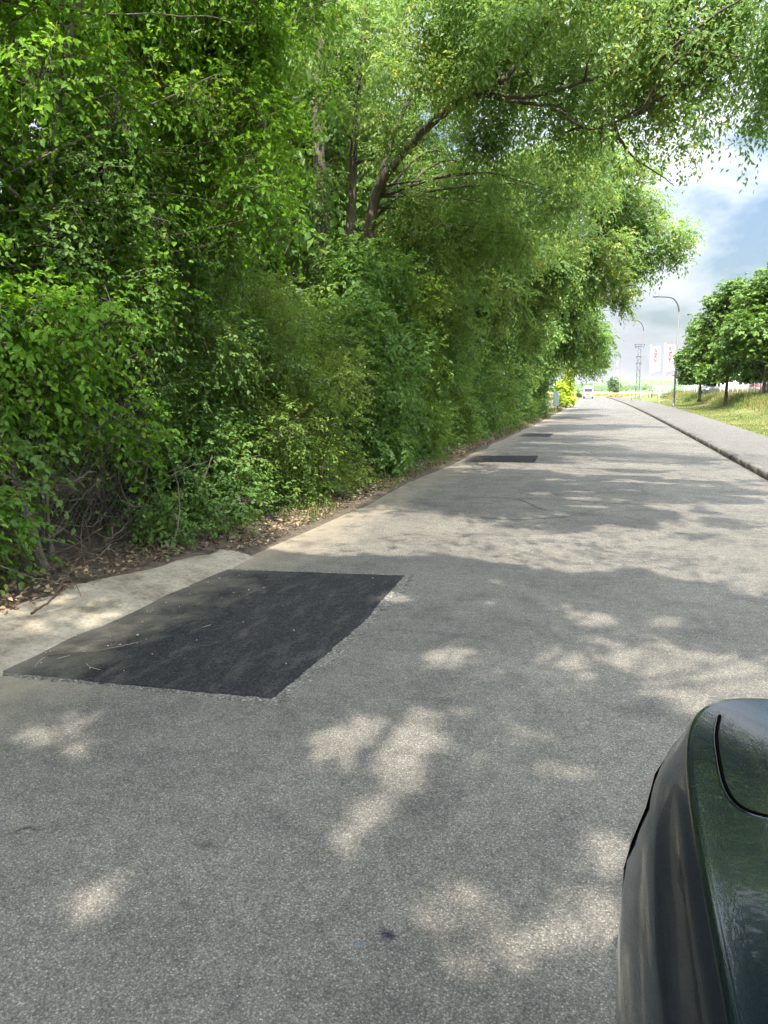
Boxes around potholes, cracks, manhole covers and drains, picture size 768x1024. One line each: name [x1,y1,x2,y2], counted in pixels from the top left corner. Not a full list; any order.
crack [474,497,654,520]
